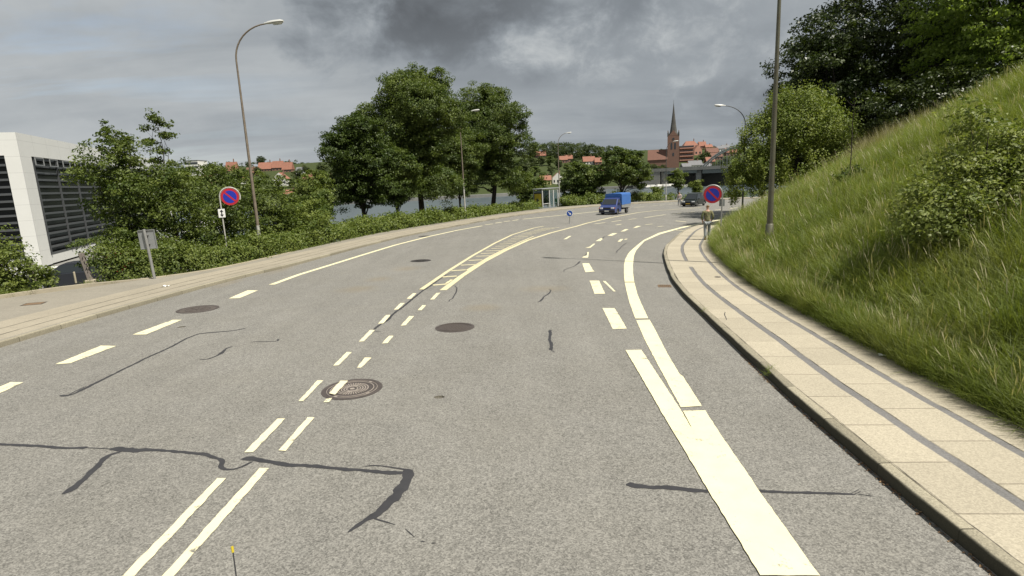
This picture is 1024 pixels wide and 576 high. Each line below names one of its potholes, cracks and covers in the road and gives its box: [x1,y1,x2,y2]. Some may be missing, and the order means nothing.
manhole cover [321,379,383,400]
